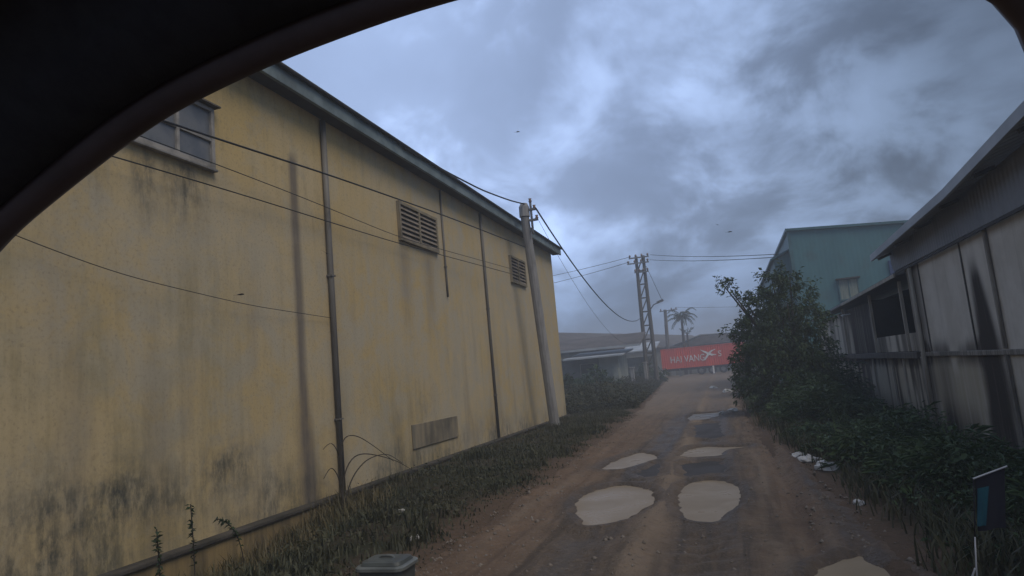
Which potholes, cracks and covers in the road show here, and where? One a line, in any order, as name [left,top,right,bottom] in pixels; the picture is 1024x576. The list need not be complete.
pothole [685,421,735,439]
pothole [665,475,754,525]
pothole [783,543,938,576]
pothole [591,449,668,470]
pothole [562,481,666,529]
pothole [683,410,728,421]
pothole [671,443,757,458]
pothole [672,457,738,477]
